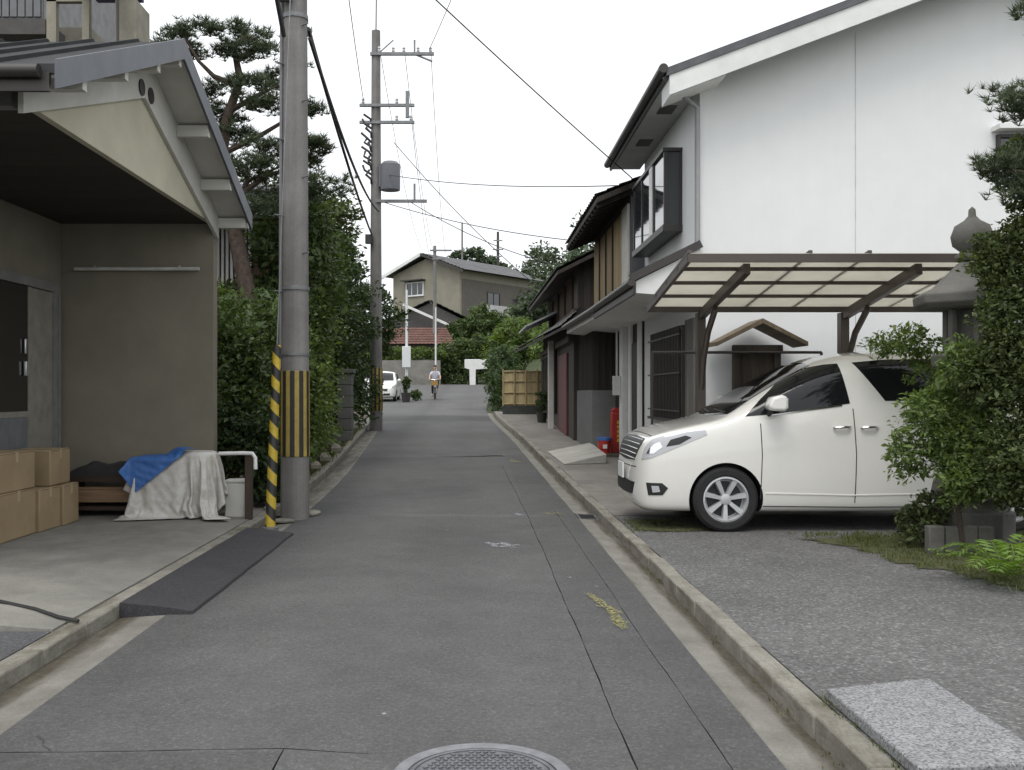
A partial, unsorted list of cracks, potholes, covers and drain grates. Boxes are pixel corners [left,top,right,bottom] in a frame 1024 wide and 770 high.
manhole cover [394,743,571,770]
crack [556,513,733,770]
crack [503,468,638,770]
